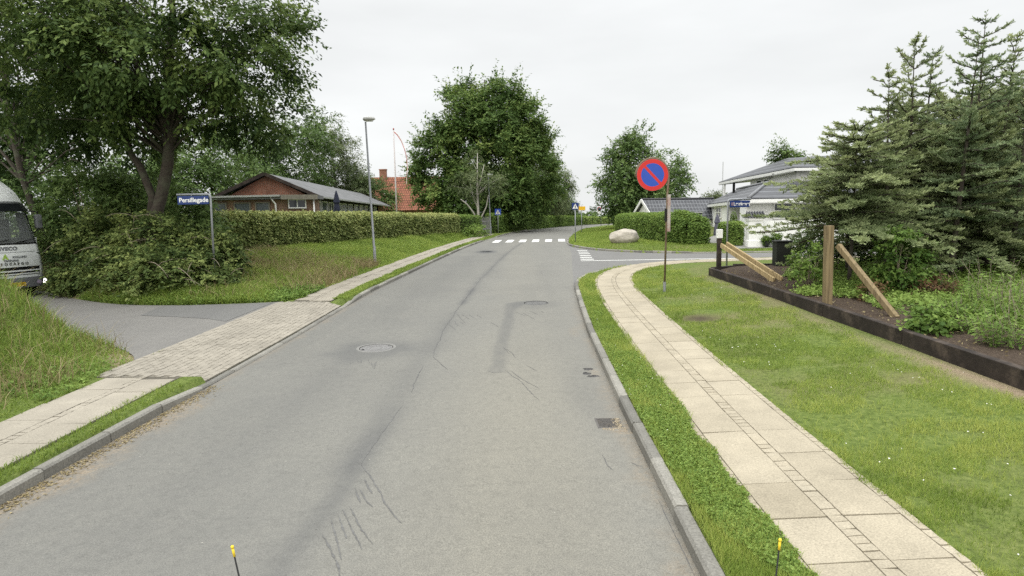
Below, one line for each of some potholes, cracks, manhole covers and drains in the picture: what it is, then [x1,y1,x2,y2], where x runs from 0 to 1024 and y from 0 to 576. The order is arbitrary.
manhole cover [356,343,396,352]
crack [322,410,400,576]
crack [433,256,504,368]
drain grate [594,418,624,428]
